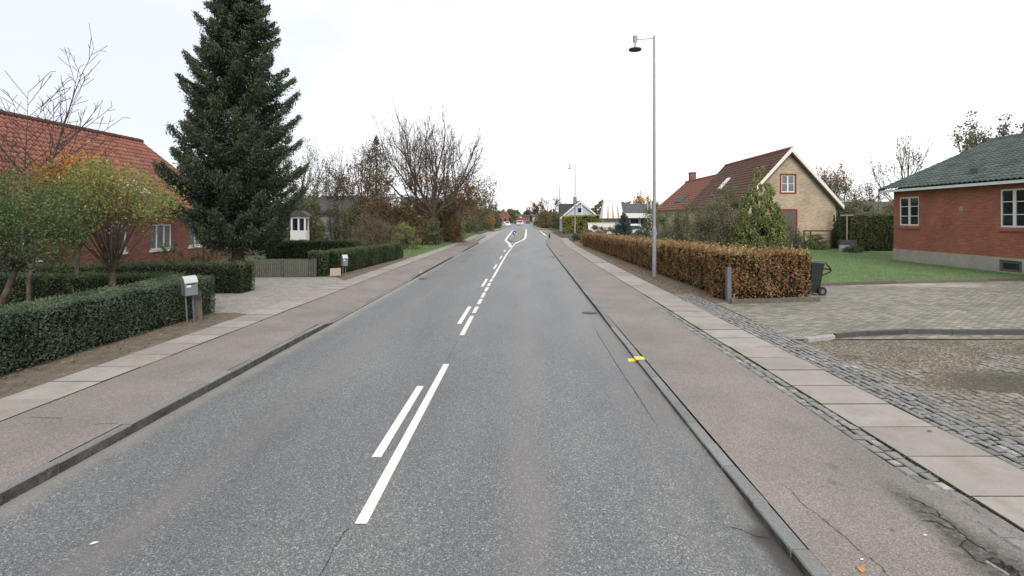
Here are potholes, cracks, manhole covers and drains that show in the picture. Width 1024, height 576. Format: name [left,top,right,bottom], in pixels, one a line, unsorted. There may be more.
crack [911,498,1004,565]
crack [785,486,888,576]
